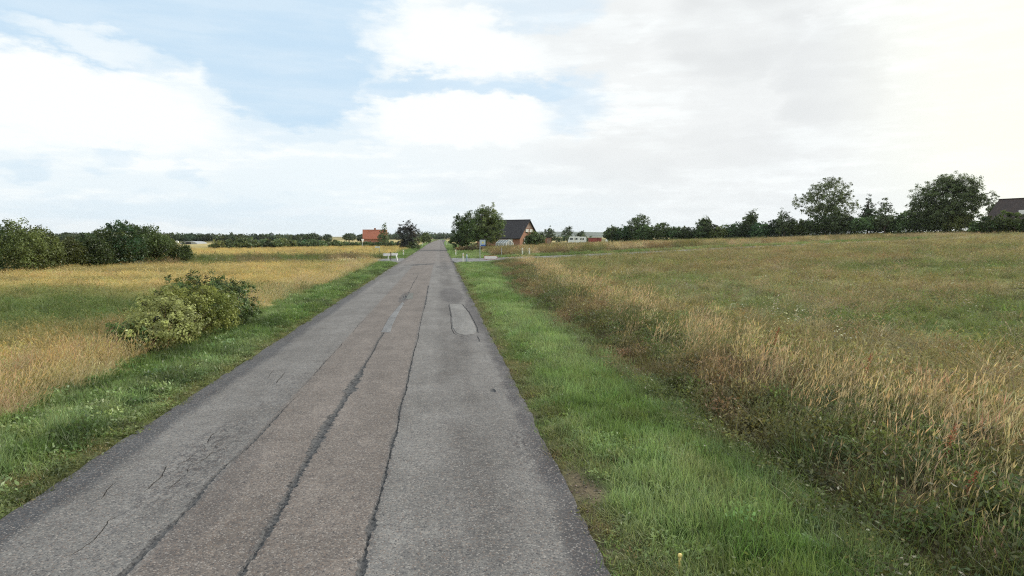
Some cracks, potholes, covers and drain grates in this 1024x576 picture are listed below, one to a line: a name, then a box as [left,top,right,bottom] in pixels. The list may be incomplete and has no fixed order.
crack [68,263,432,576]
